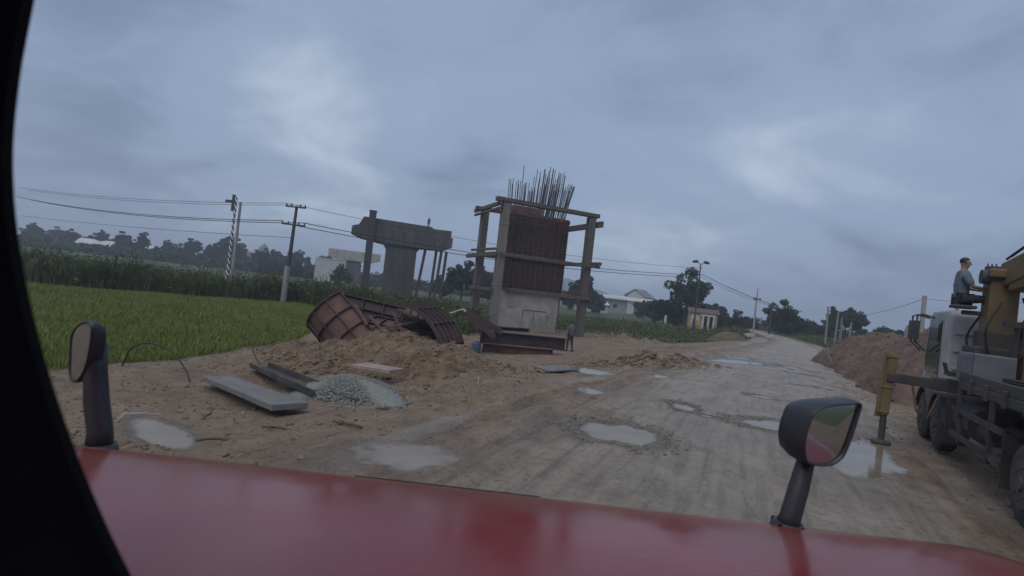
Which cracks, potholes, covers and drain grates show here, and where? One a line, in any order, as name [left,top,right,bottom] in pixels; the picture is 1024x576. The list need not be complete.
pothole [713,412,872,444]
pothole [547,411,692,456]
pothole [698,358,777,367]
pothole [660,399,704,413]
